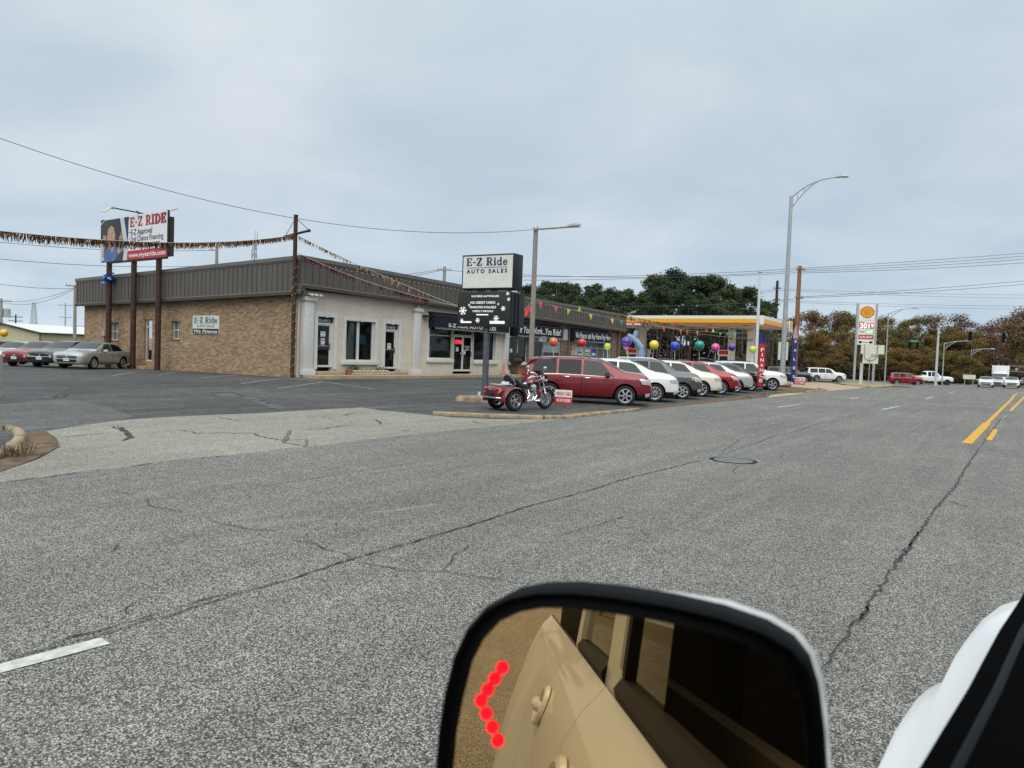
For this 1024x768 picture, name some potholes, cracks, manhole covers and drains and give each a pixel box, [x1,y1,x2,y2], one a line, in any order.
crack [821,417,1002,669]
crack [109,488,524,583]
